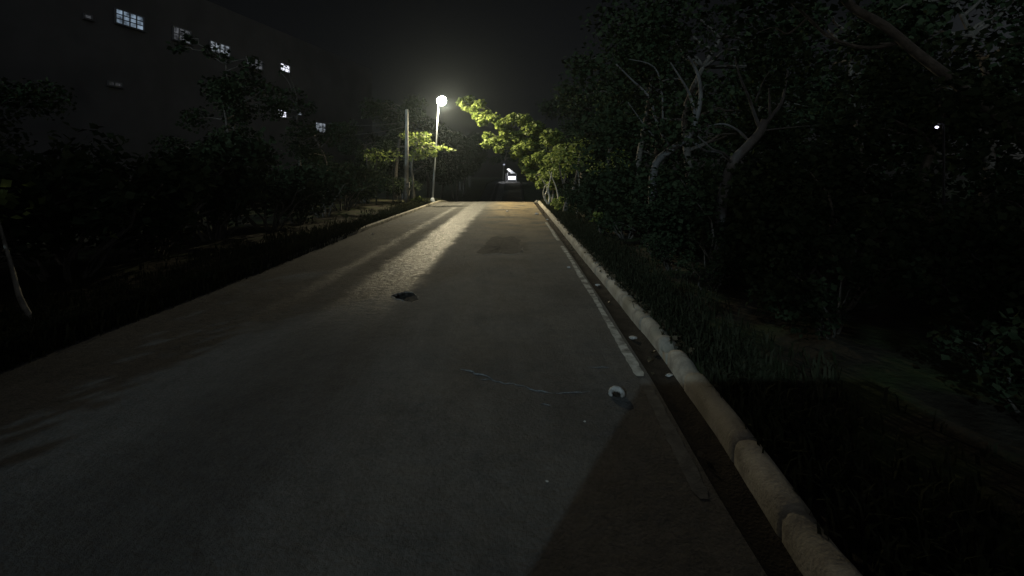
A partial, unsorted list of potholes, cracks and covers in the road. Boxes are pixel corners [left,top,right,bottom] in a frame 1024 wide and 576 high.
crack [461,369,588,405]
pothole [391,291,419,302]
